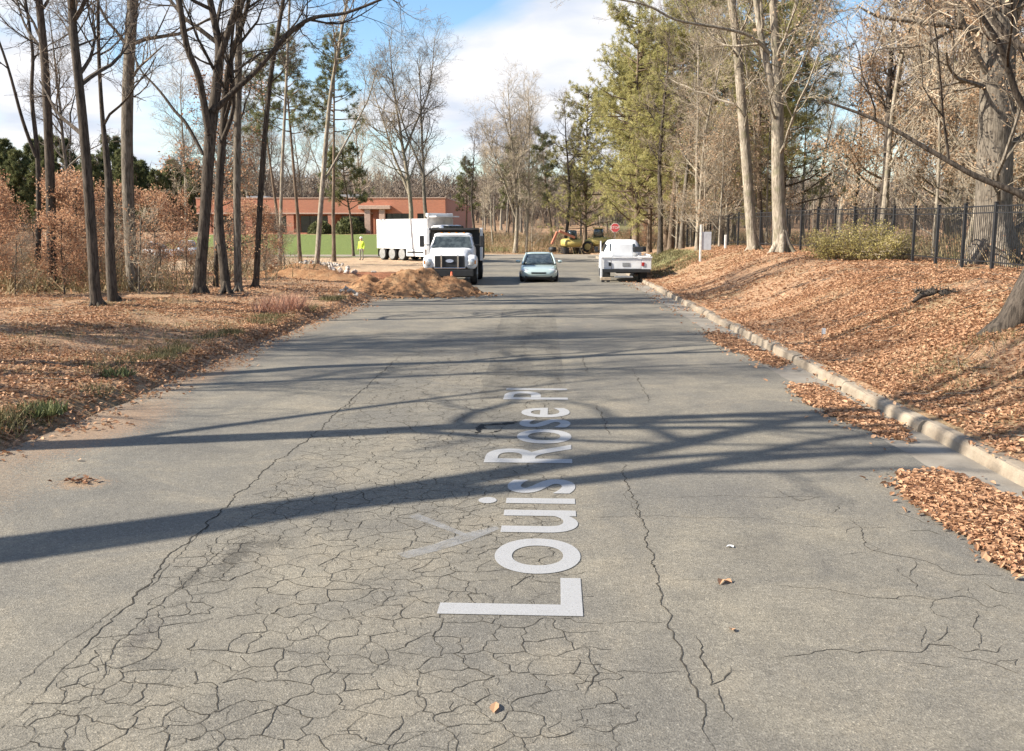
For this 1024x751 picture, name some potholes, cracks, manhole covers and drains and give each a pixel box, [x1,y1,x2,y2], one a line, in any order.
crack [584,464,750,751]
crack [767,514,1024,674]
crack [1,436,639,751]
crack [1,361,393,728]
